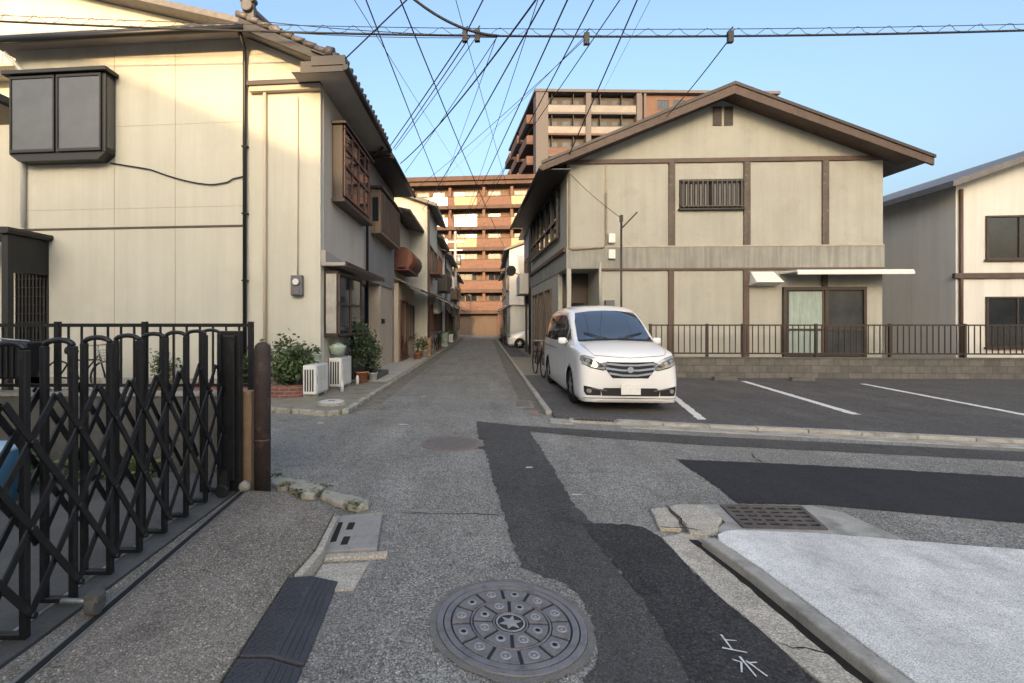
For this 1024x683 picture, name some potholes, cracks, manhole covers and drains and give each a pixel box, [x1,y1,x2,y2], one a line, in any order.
manhole cover [421,436,482,452]
crack [778,642,837,655]
crack [665,504,698,530]
drain grate [720,504,828,530]
manhole cover [437,582,588,678]
